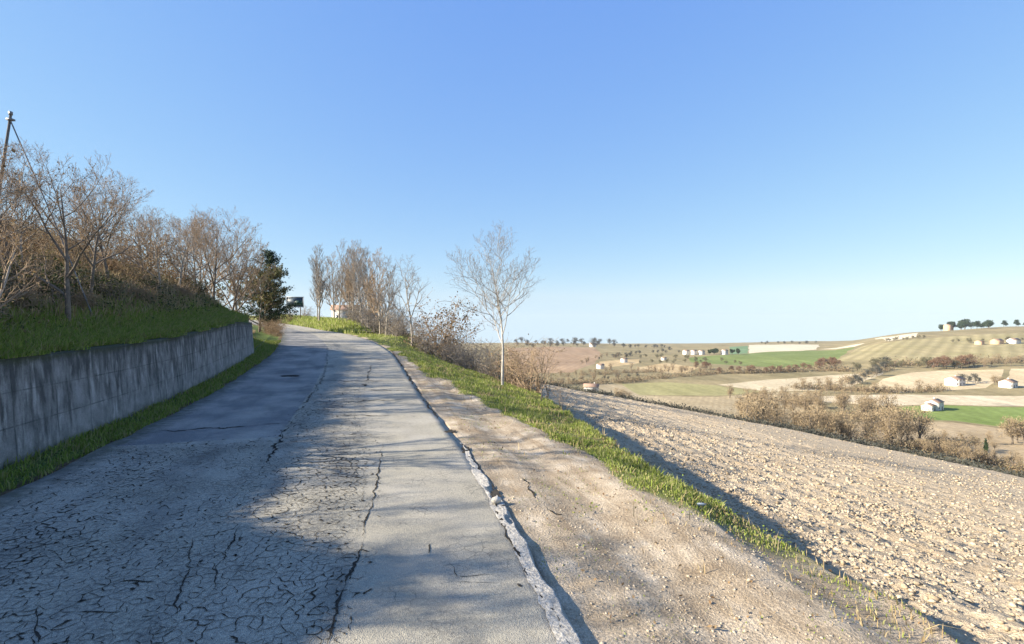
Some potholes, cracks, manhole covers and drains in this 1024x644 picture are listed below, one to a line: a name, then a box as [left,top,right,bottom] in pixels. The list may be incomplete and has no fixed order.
crack [0,354,438,644]
